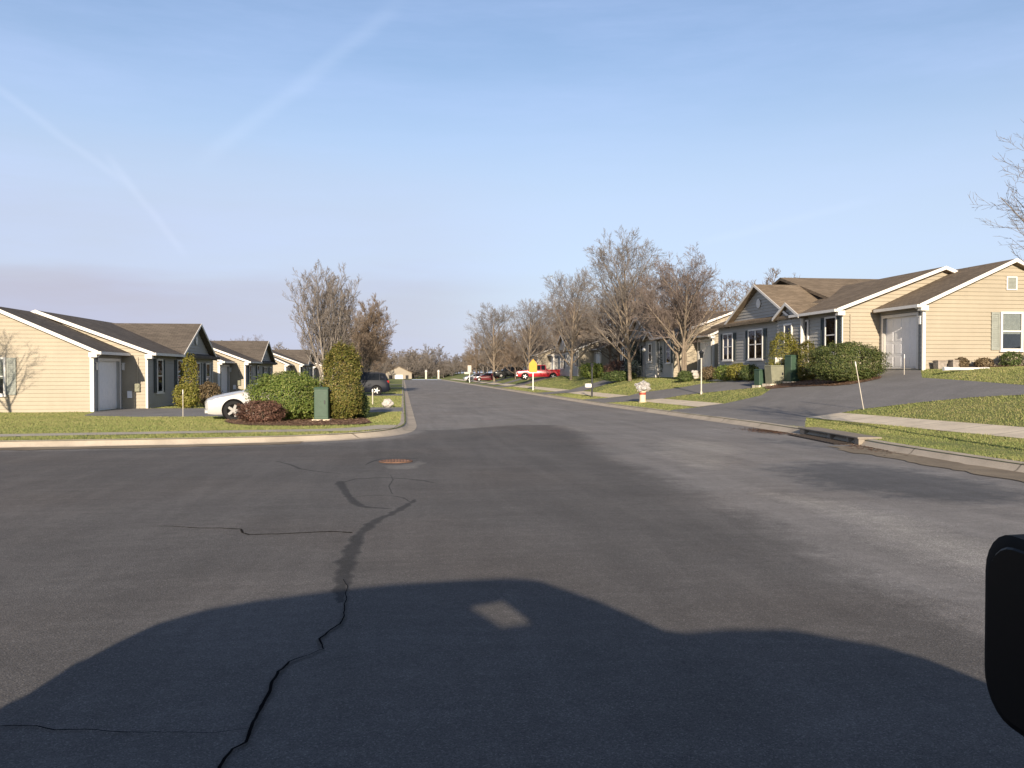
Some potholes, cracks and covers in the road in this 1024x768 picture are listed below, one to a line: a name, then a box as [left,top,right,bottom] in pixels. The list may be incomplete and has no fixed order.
crack [175,526,353,535]
crack [277,458,434,502]
crack [2,579,351,768]
